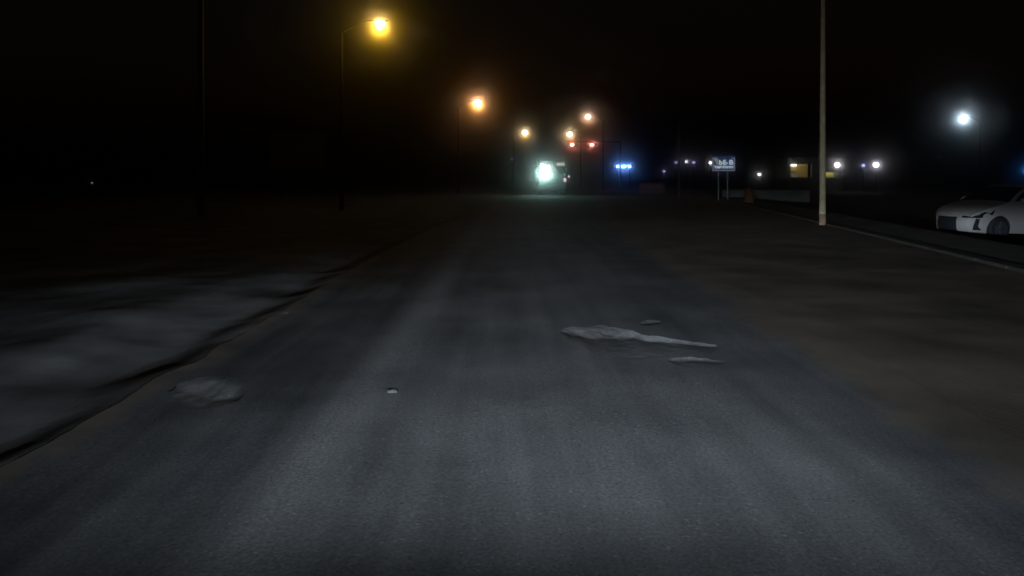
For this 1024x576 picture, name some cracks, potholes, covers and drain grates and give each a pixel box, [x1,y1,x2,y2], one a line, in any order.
pothole [668,357,724,367]
pothole [164,375,248,410]
pothole [561,325,722,360]
